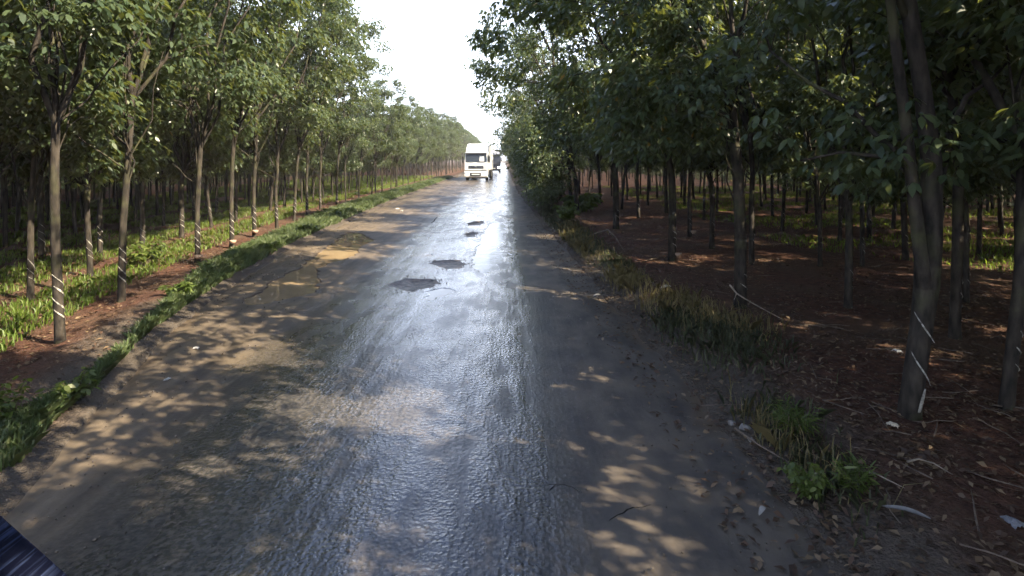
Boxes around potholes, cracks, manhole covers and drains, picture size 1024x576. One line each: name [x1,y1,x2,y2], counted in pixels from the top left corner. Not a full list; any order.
pothole [428,260,468,269]
pothole [243,232,374,305]
pothole [389,278,440,292]
